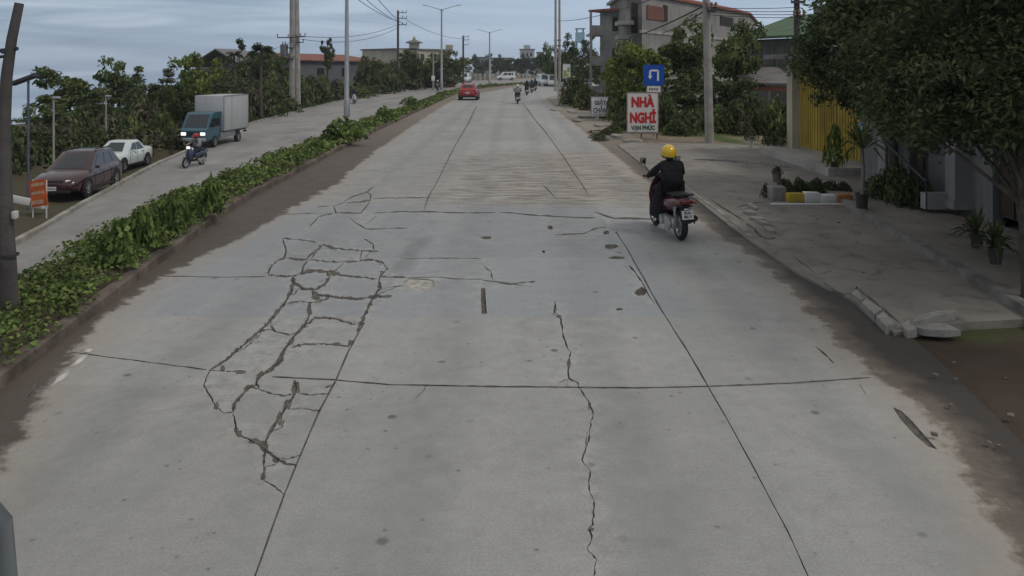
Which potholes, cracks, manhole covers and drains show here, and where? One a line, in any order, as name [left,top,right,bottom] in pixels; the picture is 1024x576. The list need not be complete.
crack [203,184,651,496]
crack [553,303,597,576]
